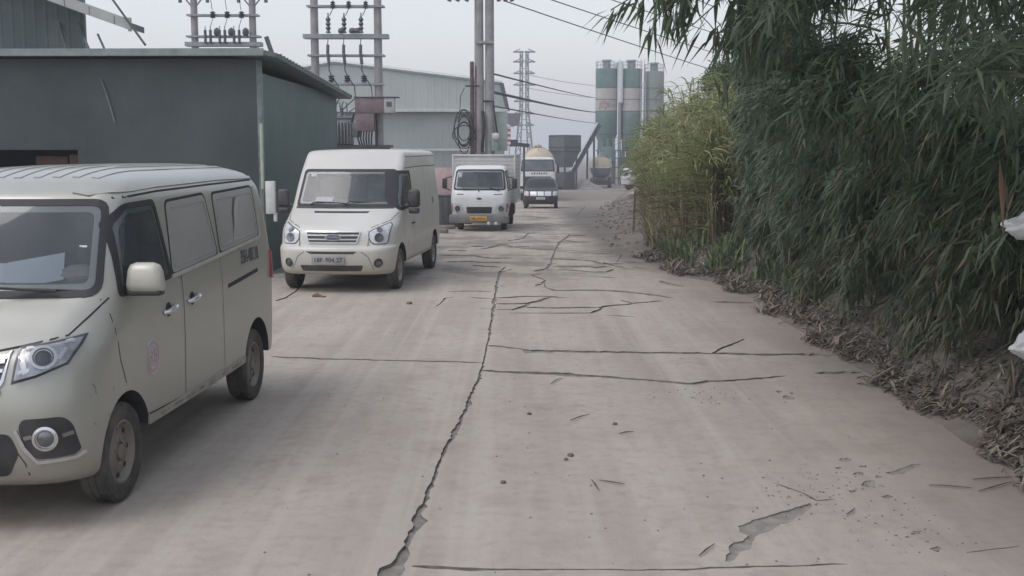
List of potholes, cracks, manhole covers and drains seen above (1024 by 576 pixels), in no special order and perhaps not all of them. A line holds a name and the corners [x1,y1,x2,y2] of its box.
pothole [725,503,812,562]
crack [377,217,862,576]
